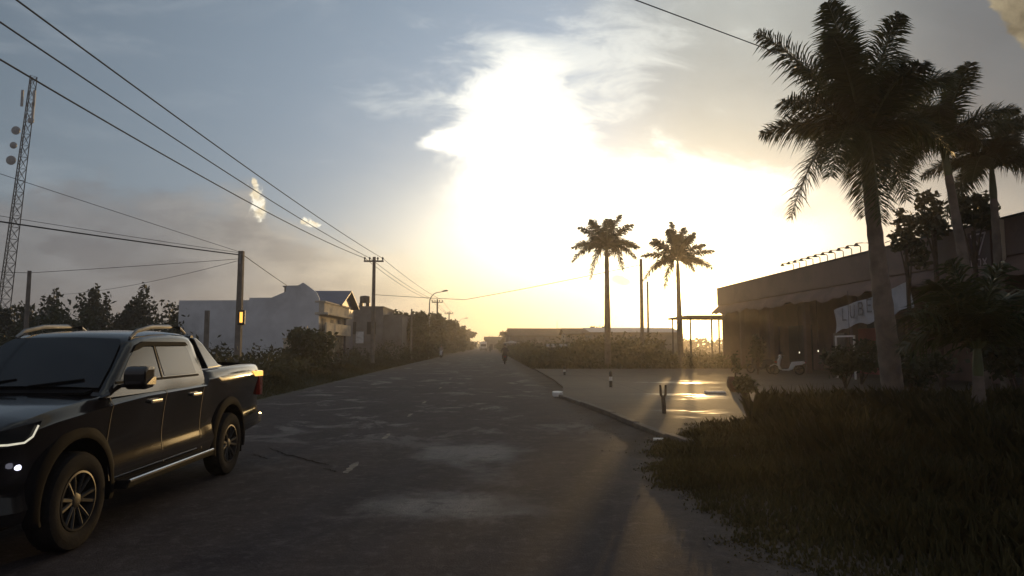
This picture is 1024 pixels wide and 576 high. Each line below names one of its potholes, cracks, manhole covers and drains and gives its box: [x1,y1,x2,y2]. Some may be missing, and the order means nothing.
crack [251,447,336,472]
